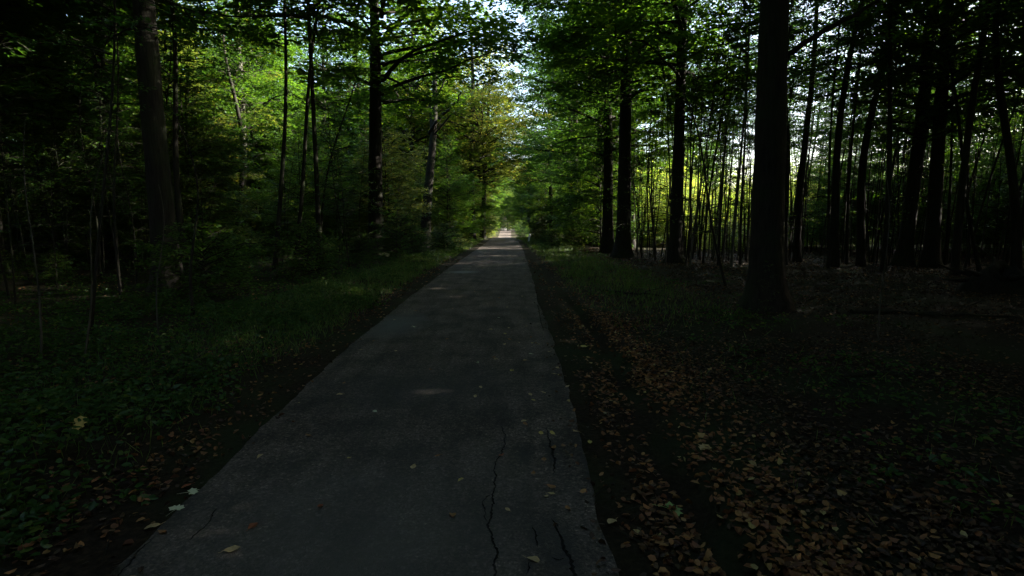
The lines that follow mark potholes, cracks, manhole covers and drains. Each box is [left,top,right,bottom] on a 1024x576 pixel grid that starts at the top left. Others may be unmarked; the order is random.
crack [188,507,218,541]
crack [482,426,506,576]
crack [526,519,577,576]
crack [546,427,557,474]
